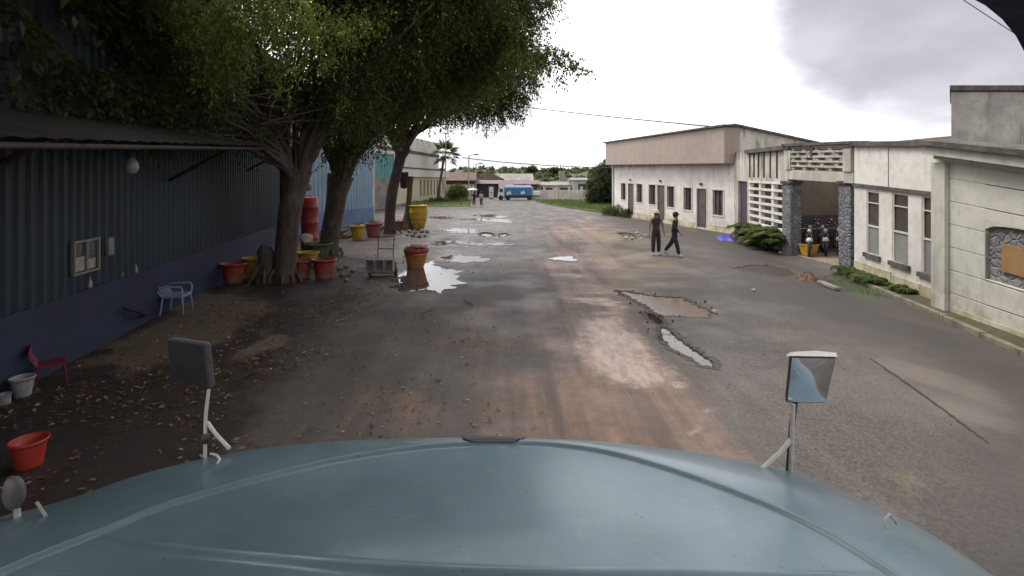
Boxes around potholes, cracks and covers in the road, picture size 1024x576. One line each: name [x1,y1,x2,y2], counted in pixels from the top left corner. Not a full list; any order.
pothole [612,290,718,319]
pothole [733,263,802,278]
pothole [647,325,723,370]
crack [870,358,989,444]
